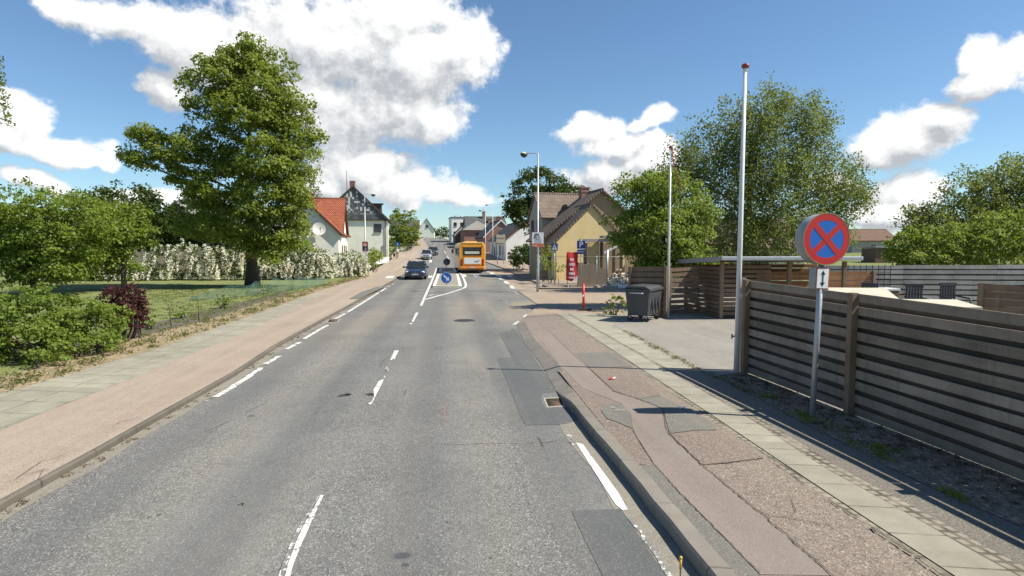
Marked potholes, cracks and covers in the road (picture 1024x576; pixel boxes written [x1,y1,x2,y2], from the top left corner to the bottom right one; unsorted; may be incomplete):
drain grate [543,397,566,408]
